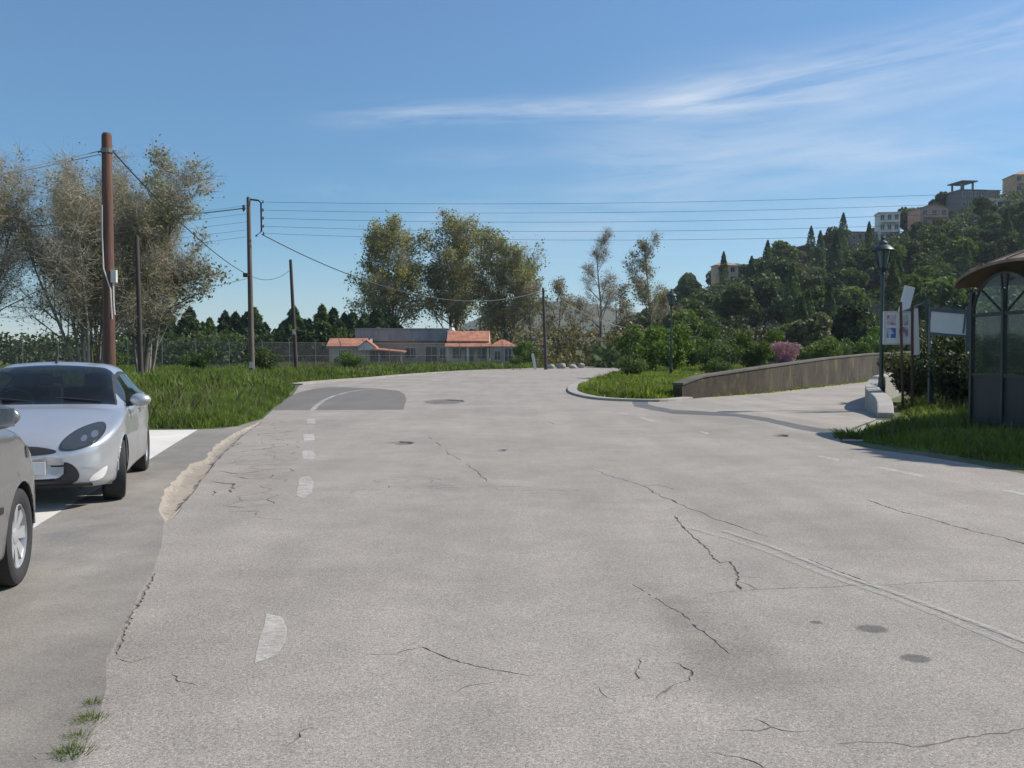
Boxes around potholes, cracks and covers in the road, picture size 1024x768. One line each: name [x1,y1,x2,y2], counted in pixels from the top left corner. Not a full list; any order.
crack [211,421,299,519]
crack [427,437,560,491]
crack [631,584,729,698]
crack [370,646,531,694]
crack [837,728,1024,747]
crack [599,471,1023,594]
